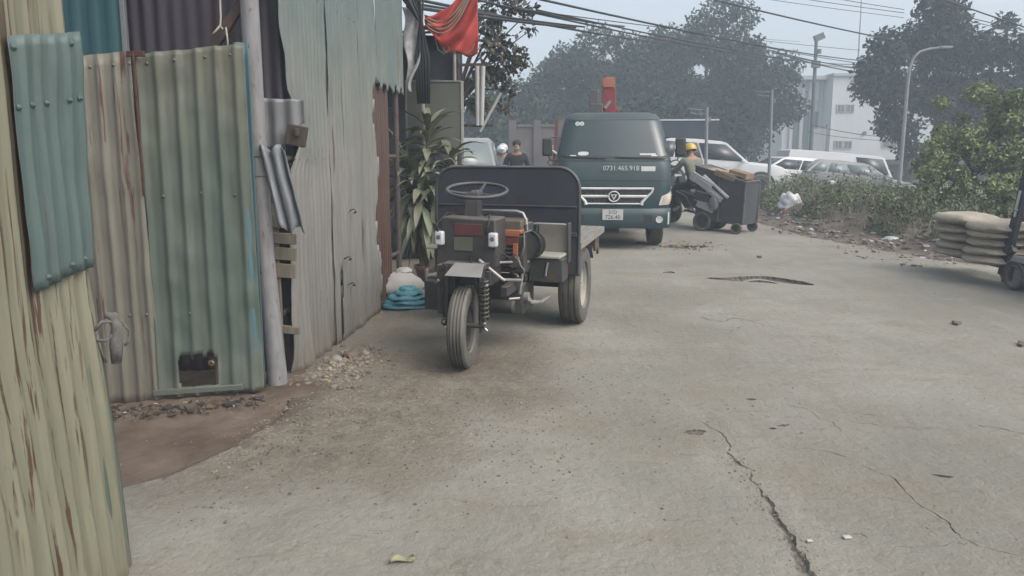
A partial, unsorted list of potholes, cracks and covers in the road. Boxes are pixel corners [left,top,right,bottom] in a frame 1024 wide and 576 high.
crack [809,448,1022,556]
crack [702,422,816,576]
pothole [704,276,814,285]
crack [794,406,945,431]
